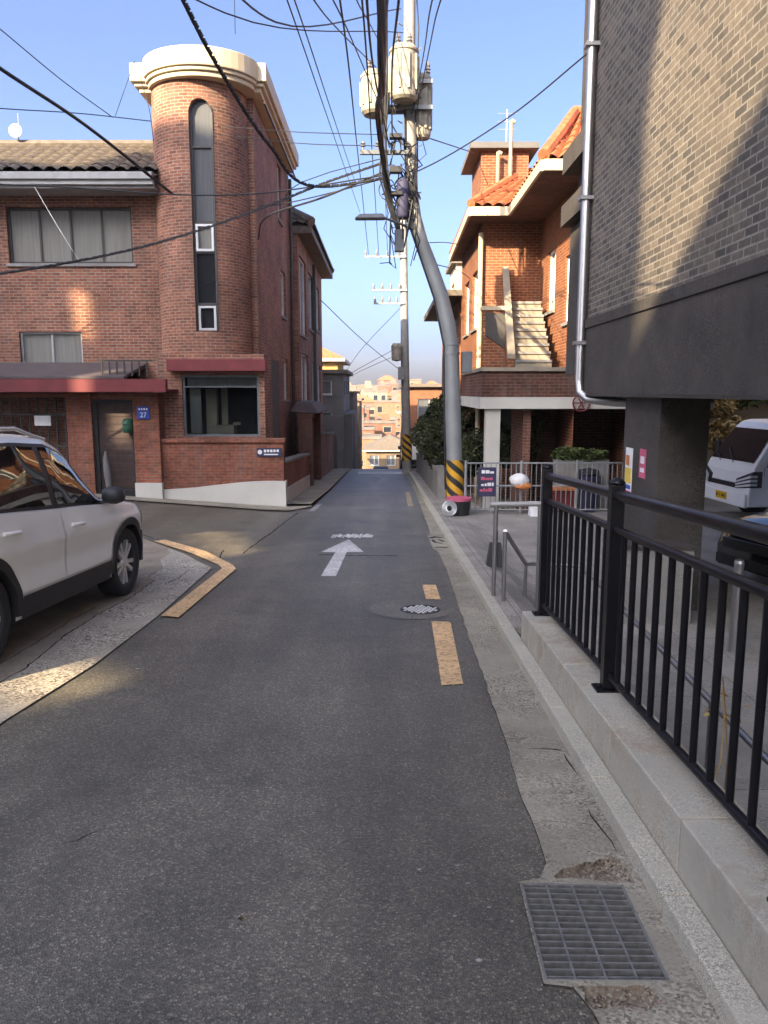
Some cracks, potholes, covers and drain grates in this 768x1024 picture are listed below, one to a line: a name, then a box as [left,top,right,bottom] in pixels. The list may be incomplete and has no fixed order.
pothole [554,857,635,883]
drain grate [520,883,670,1024]
manhole cover [370,599,455,619]
crack [243,513,298,554]
crack [529,748,617,852]
pothole [578,985,663,1014]
